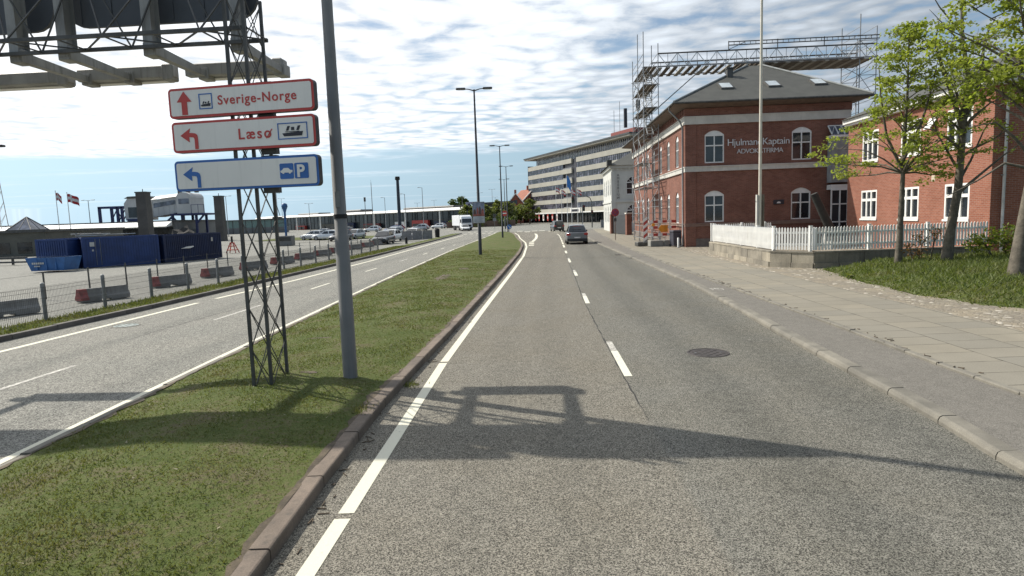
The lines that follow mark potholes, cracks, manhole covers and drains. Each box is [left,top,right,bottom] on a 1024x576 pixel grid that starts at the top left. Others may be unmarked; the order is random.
manhole cover [687,348,730,357]
